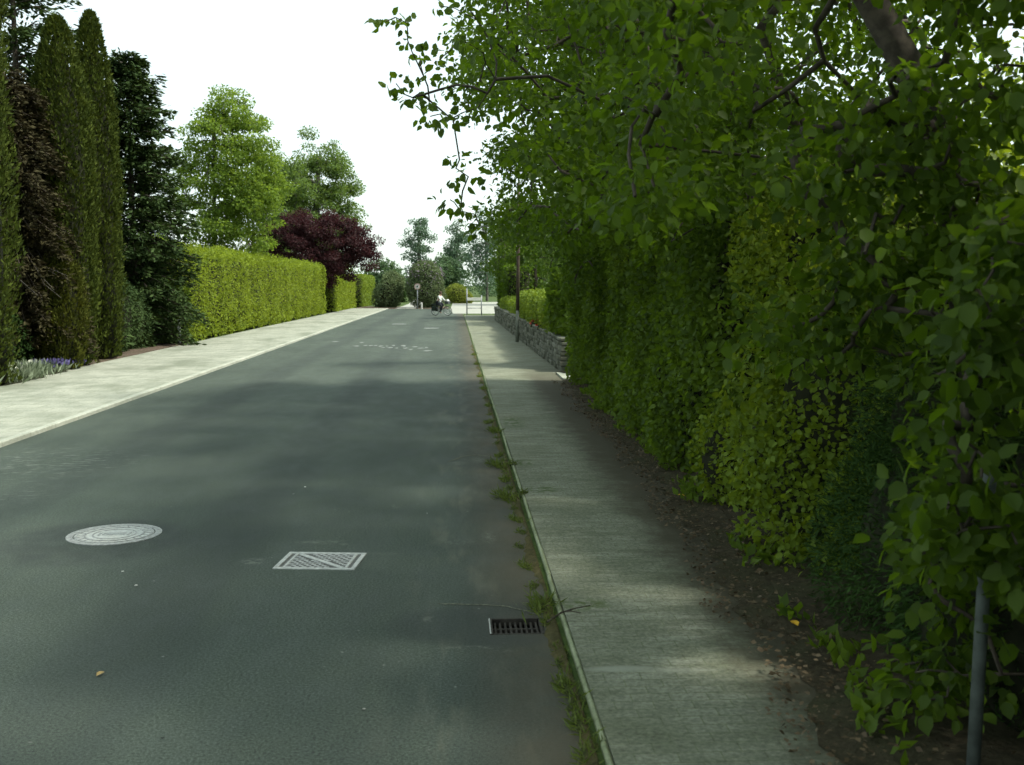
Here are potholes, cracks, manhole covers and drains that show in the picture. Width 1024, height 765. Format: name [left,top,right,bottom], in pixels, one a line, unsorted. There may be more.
drain grate [488,617,545,635]
crack [438,603,535,614]
manhole cover [65,524,162,546]
